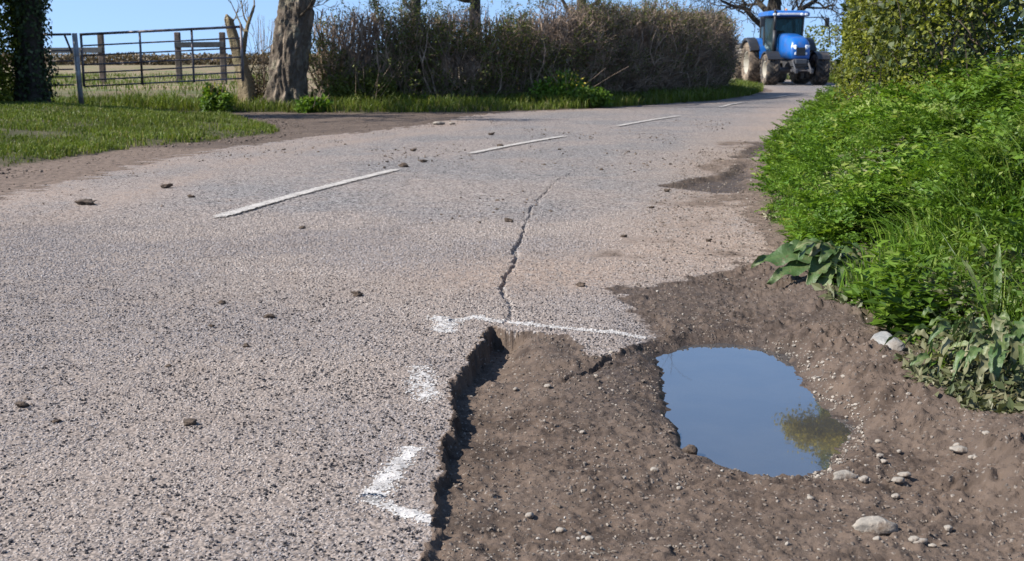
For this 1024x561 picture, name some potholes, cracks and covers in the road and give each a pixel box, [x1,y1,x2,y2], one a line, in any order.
pothole [421,326,1024,561]
pothole [654,162,764,193]
crack [499,167,579,325]
